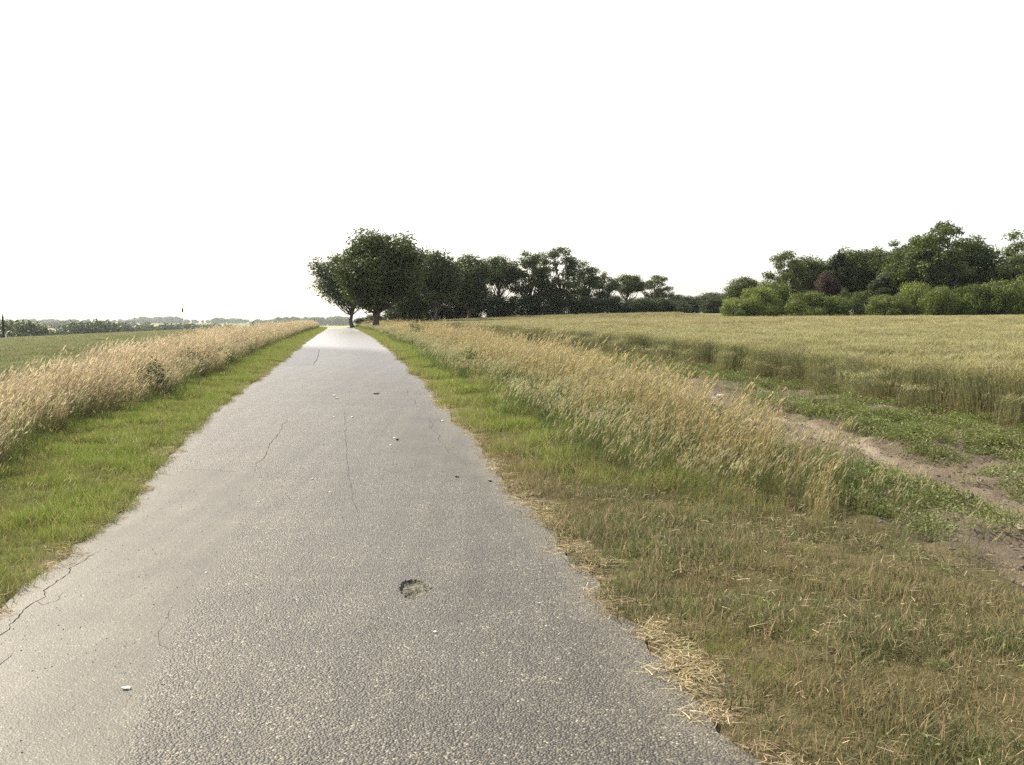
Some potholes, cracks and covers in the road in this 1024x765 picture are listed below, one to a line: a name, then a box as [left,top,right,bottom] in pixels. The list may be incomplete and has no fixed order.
crack [0,551,99,635]
pothole [399,579,434,600]
